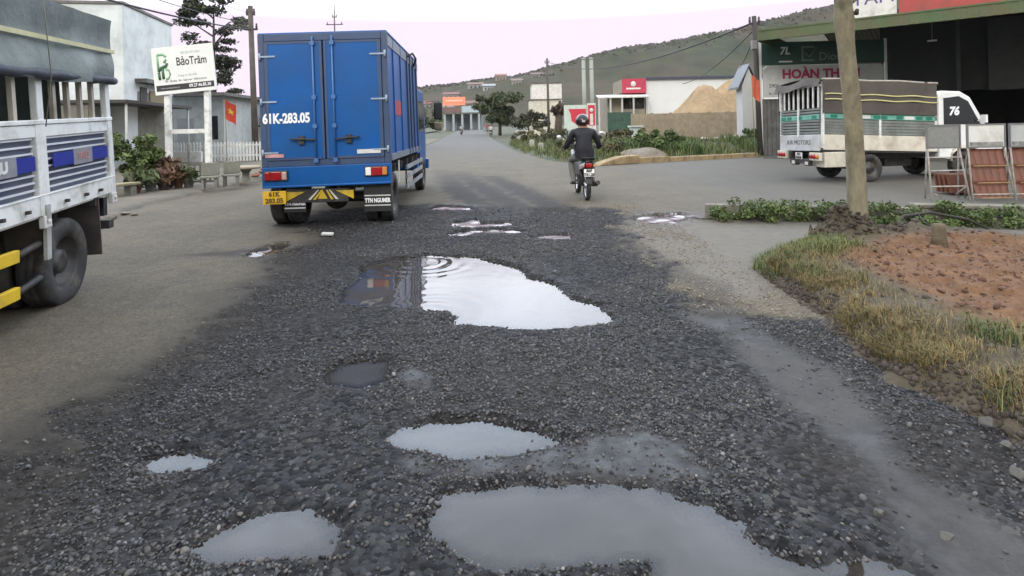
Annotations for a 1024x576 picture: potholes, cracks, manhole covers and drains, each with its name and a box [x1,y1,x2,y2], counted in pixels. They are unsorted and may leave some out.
pothole [312,353,404,390]
pothole [125,440,231,481]
pothole [446,227,525,237]
pothole [371,409,577,464]
pothole [632,211,693,225]
pothole [415,468,942,576]
pothole [242,241,295,257]
pothole [330,252,621,331]
pothole [164,495,361,572]
pothole [445,218,518,228]
